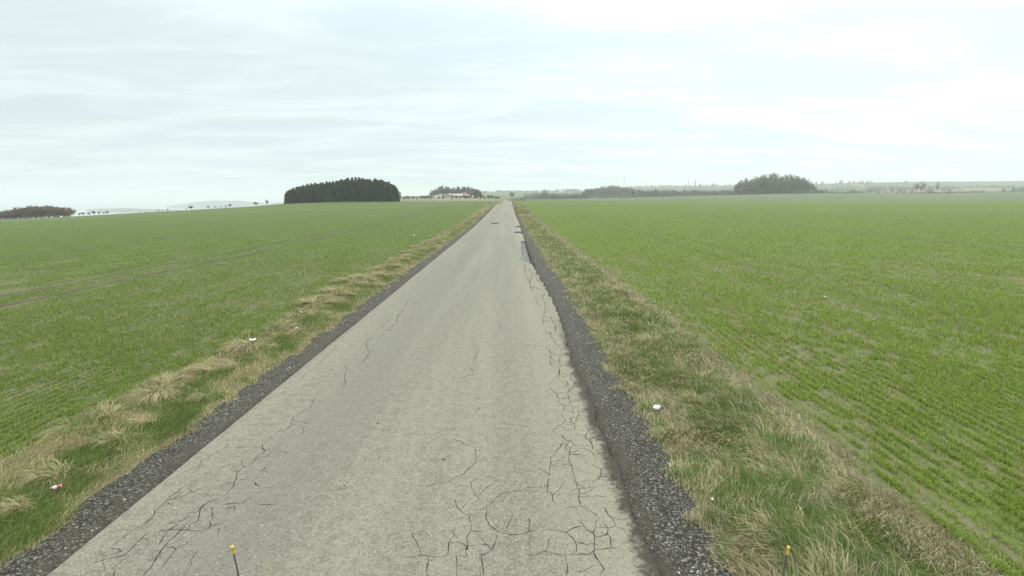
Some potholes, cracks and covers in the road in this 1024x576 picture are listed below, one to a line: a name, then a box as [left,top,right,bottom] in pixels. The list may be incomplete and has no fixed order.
pothole [521,241,535,266]
